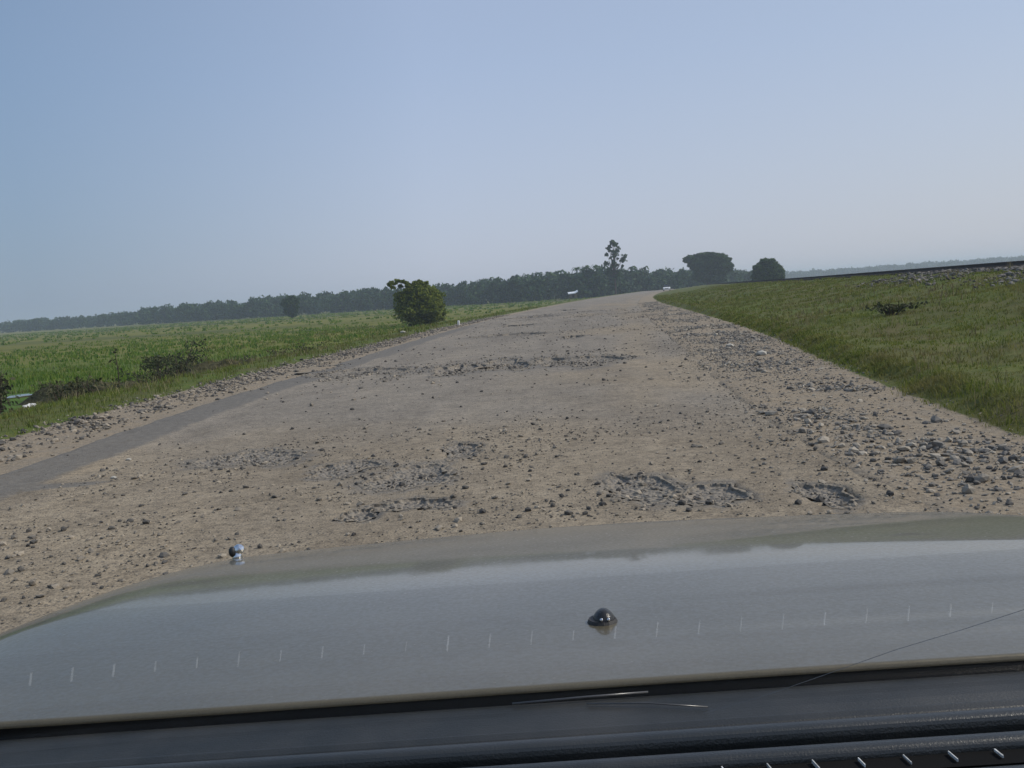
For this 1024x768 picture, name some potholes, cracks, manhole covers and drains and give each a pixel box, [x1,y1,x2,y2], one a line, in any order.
pothole [442,441,482,458]
pothole [602,474,683,505]
pothole [364,496,460,512]
pothole [528,355,633,368]
pothole [335,508,378,522]
pothole [791,481,859,509]
pothole [190,448,308,468]
pothole [307,460,385,479]
pothole [470,358,534,371]
pothole [668,482,754,506]
pothole [429,363,491,377]
pothole [358,462,454,492]
